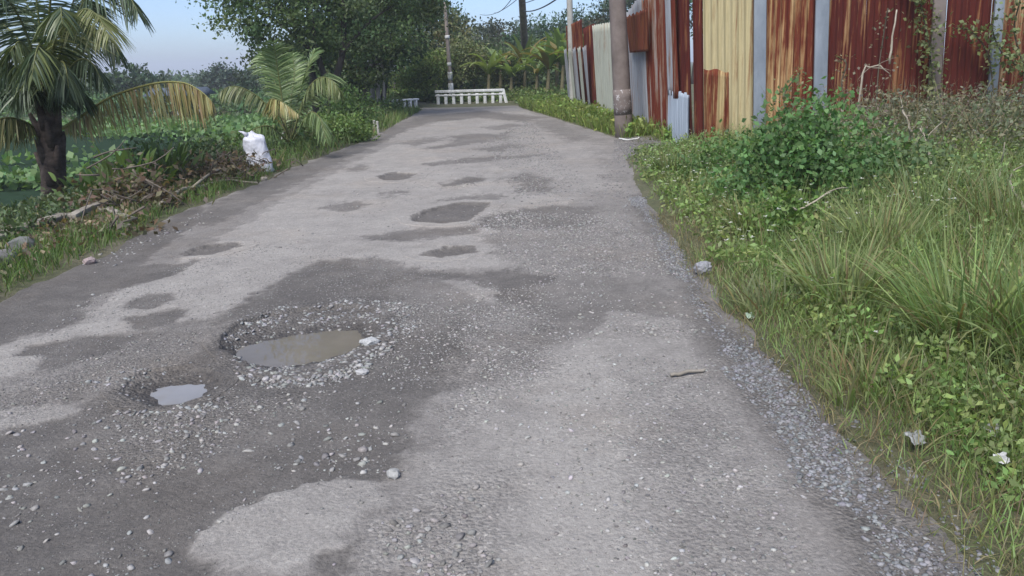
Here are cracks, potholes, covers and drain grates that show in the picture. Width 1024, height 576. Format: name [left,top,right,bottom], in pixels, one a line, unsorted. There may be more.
pothole [101,361,239,413]
pothole [202,300,399,379]
